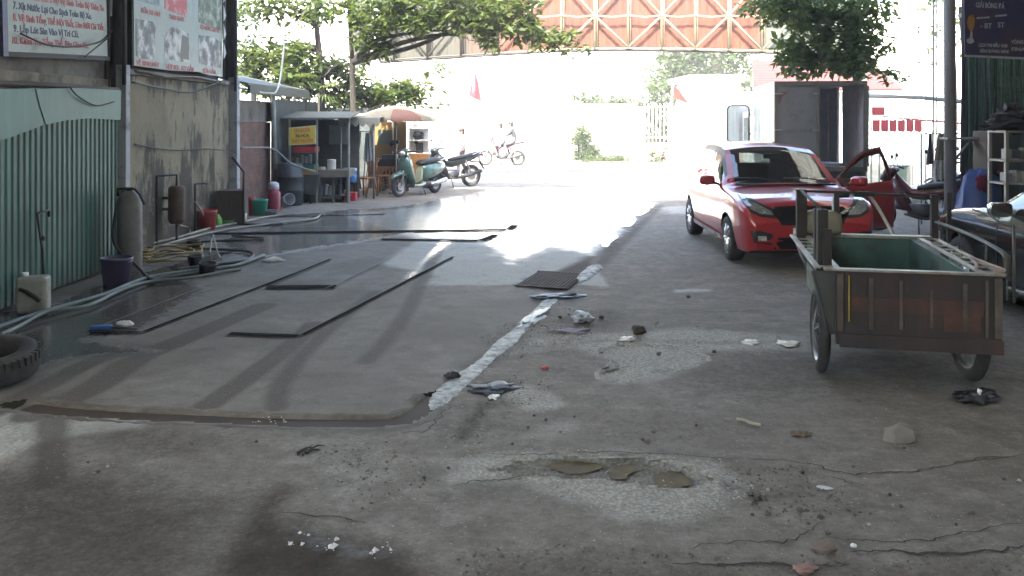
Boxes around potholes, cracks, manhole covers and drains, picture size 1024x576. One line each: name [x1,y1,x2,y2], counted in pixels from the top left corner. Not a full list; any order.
crack [490,451,1024,486]
crack [283,512,365,523]
drain grate [514,270,580,289]
pothole [478,452,723,492]
crack [672,522,1024,568]
